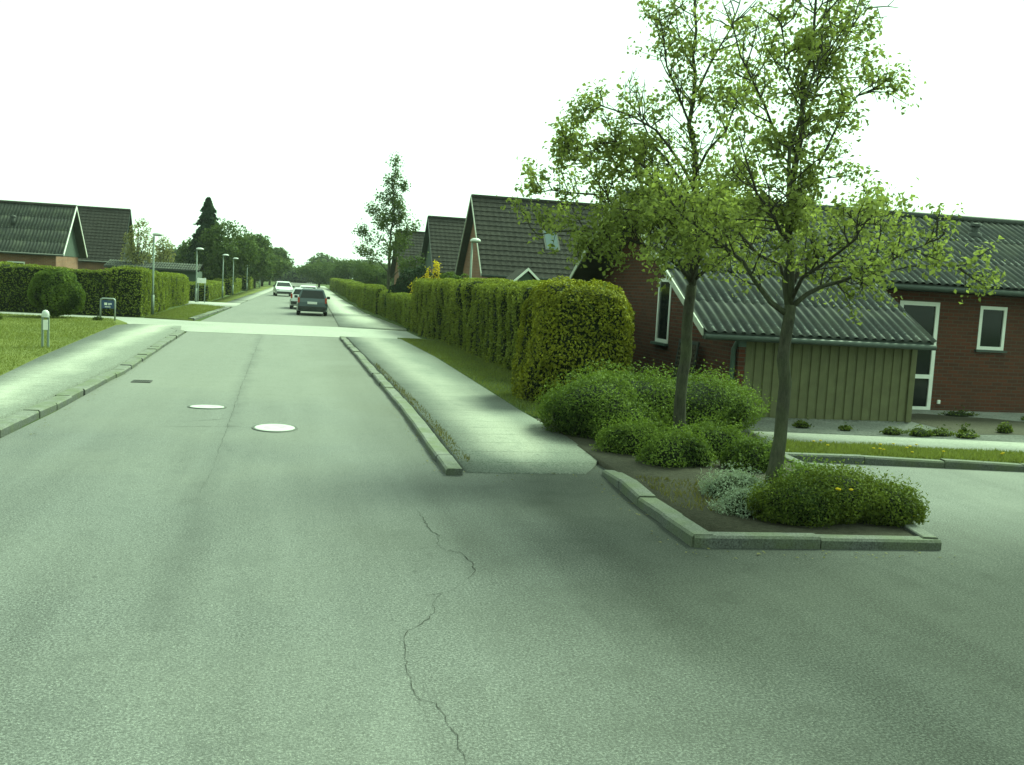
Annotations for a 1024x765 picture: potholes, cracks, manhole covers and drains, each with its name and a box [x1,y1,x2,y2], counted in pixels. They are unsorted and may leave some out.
crack [404,515,476,765]
manhole cover [252,423,298,432]
